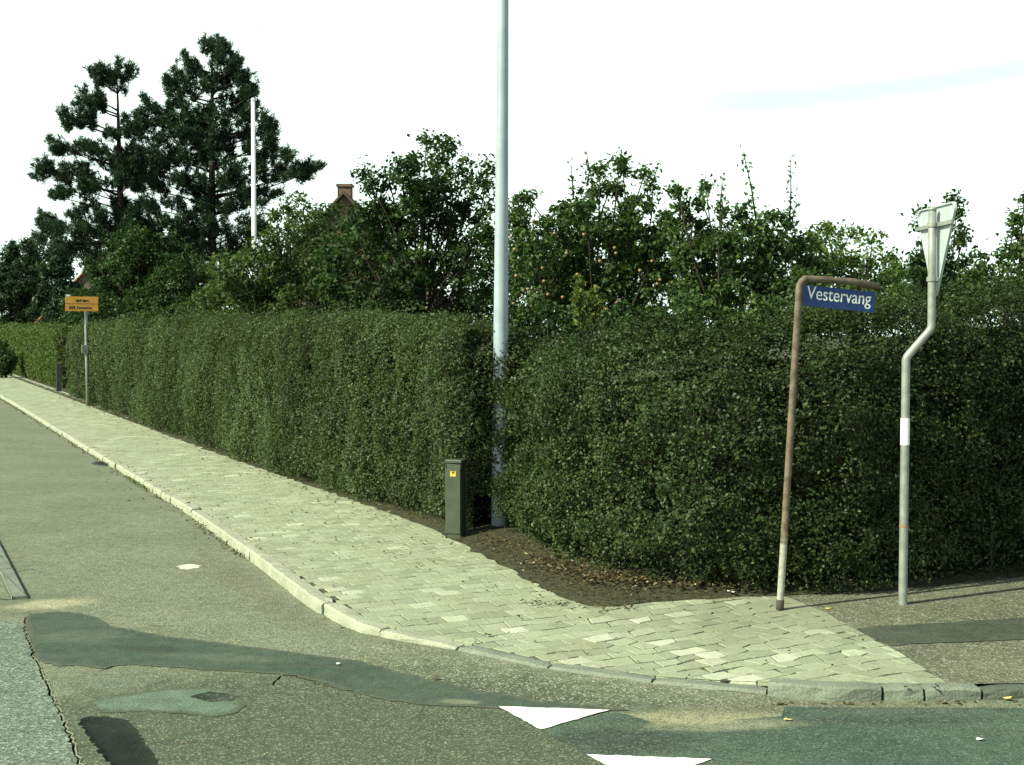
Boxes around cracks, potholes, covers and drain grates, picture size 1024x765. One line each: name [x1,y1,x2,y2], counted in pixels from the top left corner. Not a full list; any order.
crack [272,675,336,689]
crack [14,613,85,765]
